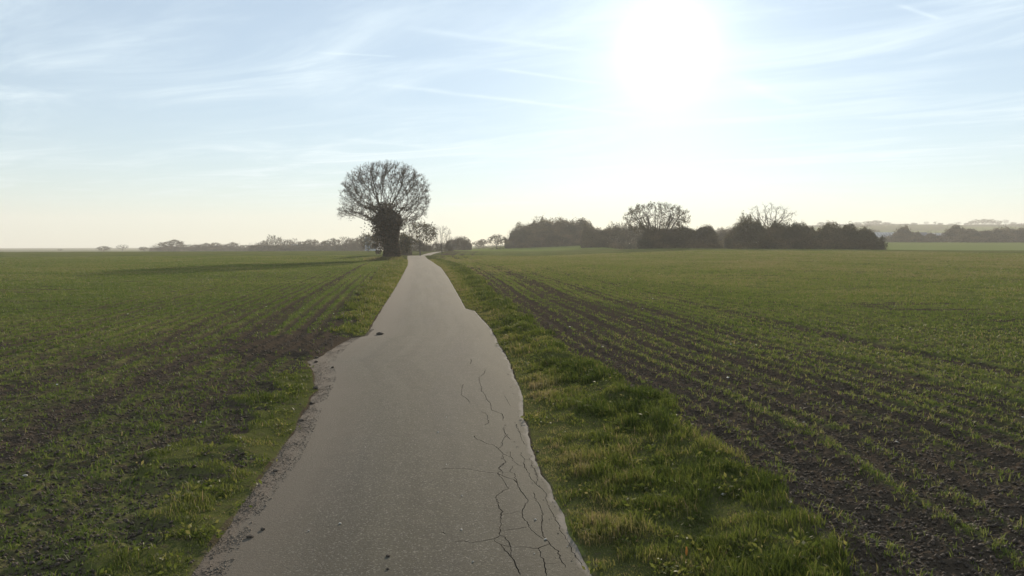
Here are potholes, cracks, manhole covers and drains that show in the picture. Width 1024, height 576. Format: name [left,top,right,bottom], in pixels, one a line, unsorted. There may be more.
crack [447,360,582,576]
